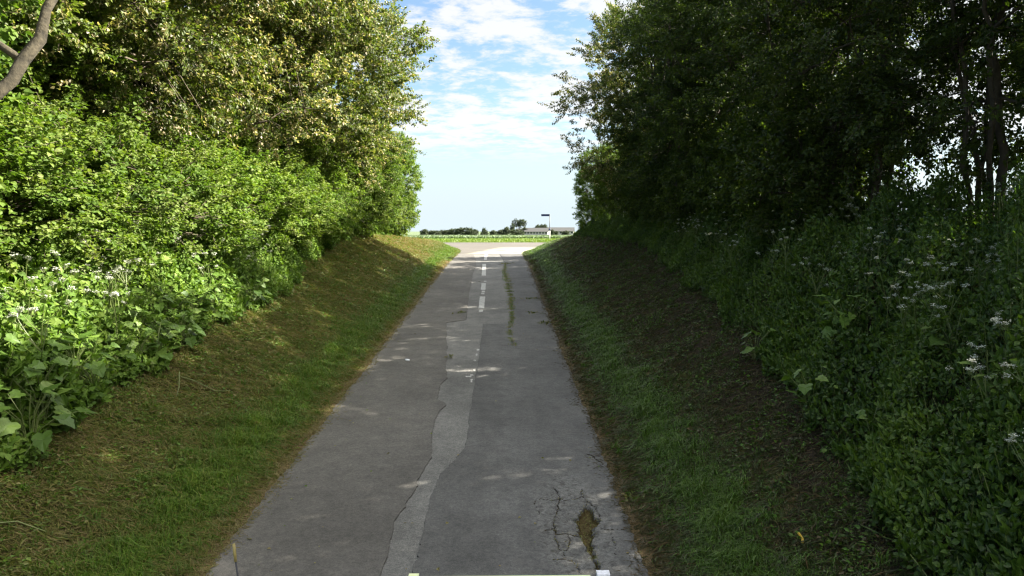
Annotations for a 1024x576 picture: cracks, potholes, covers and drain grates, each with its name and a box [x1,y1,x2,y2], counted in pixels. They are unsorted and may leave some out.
pothole [574,505,604,570]
crack [534,489,624,572]
